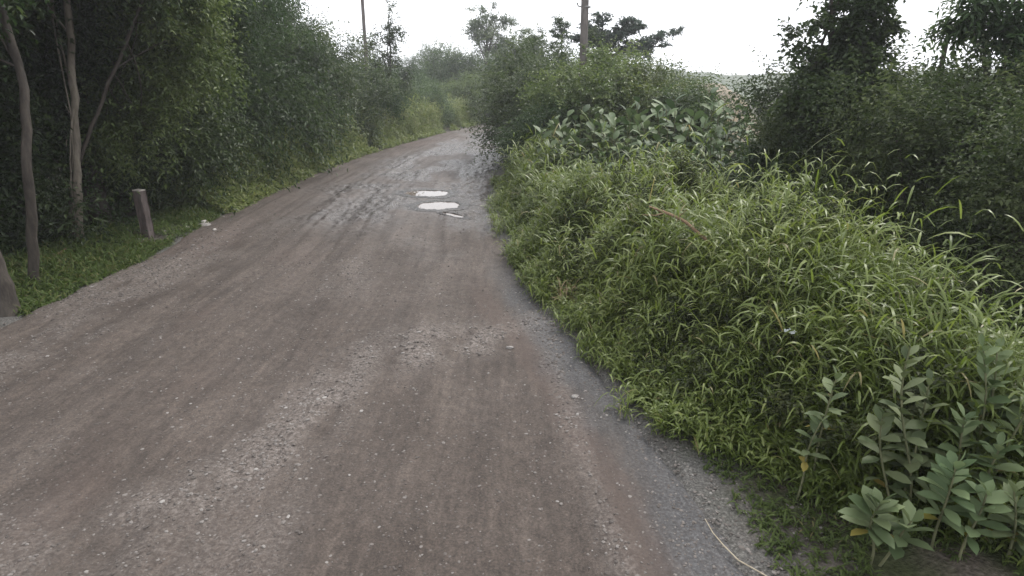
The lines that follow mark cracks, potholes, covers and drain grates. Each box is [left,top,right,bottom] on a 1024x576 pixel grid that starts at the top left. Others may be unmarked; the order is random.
pothole [437,211,471,219]
pothole [406,200,473,212]
pothole [393,189,459,198]
